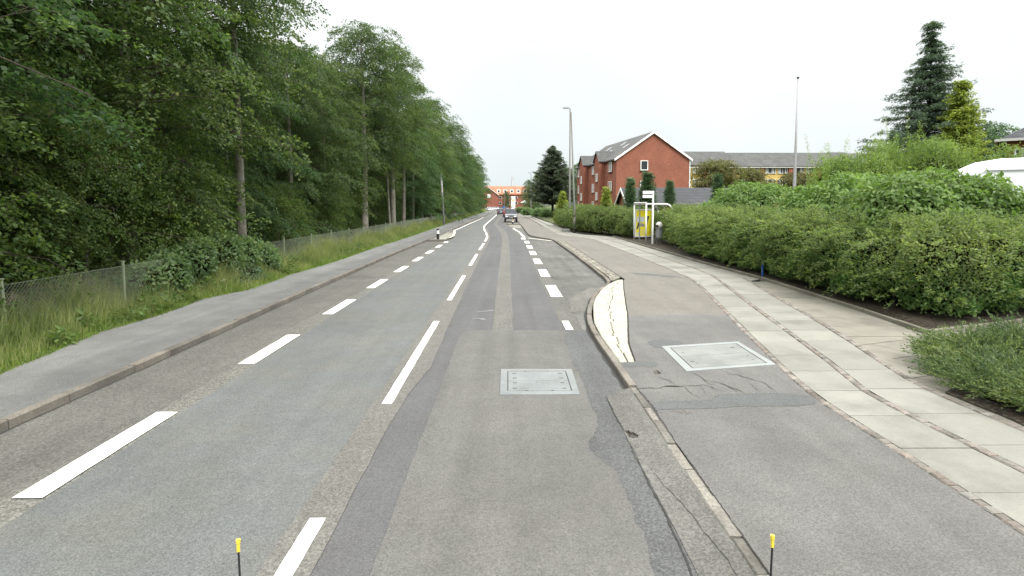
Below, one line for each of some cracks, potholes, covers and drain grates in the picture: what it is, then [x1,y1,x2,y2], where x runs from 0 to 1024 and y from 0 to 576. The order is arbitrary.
crack [607,372,775,576]
manhole cover [661,341,776,372]
manhole cover [500,369,580,395]
